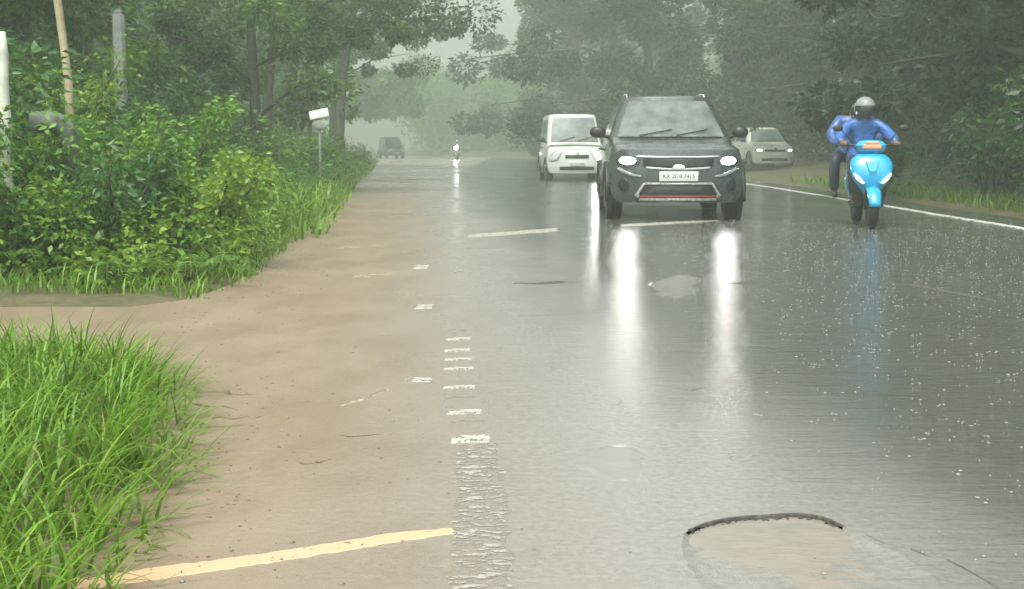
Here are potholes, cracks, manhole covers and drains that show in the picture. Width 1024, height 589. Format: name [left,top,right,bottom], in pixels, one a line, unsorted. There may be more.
crack [867,535,1000,589]
pothole [682,513,944,589]
crack [872,280,1006,303]
